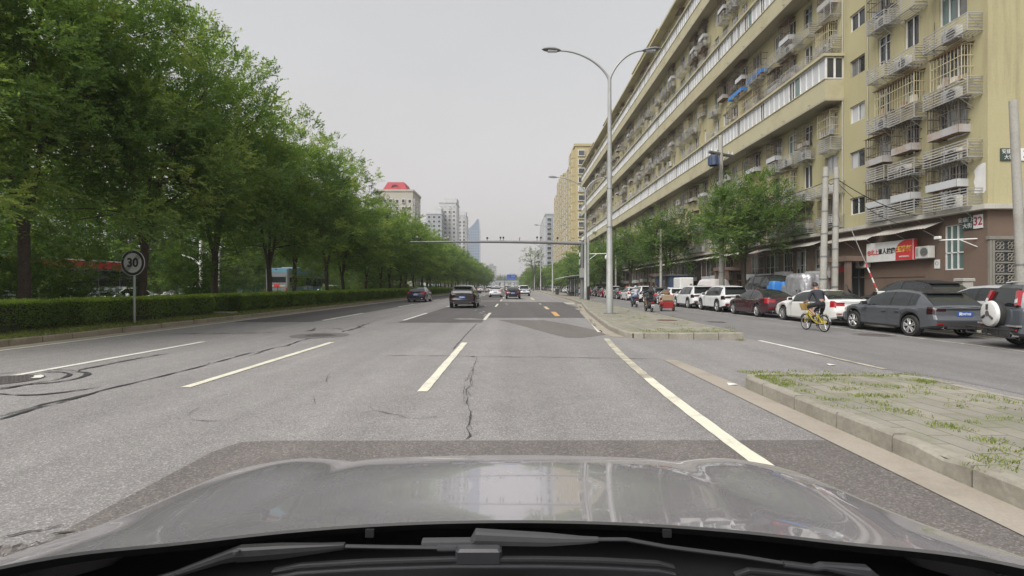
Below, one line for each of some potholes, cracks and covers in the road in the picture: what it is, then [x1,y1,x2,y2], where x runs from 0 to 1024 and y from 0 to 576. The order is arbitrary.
manhole cover [0,374,45,384]
crack [460,357,478,439]
